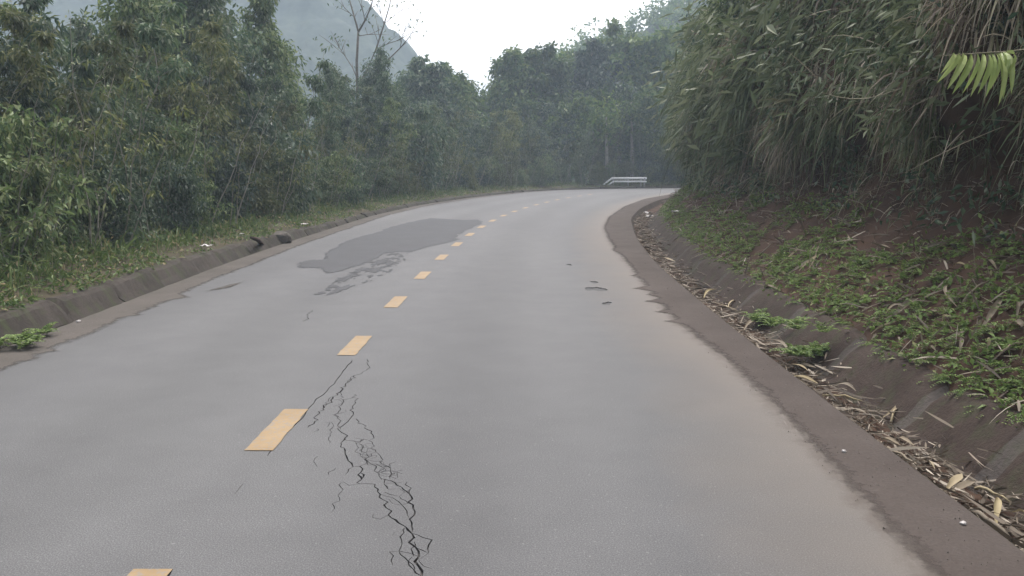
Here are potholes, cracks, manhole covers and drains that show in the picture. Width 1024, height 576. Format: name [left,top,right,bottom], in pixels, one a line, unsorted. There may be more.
crack [237,360,432,576]
